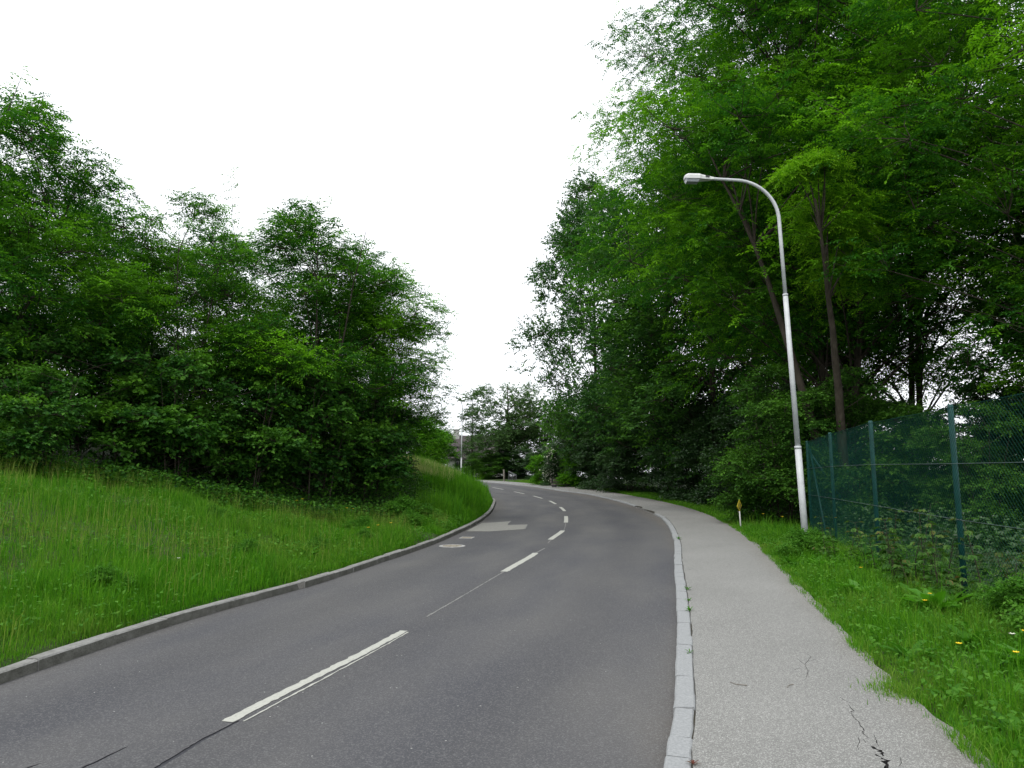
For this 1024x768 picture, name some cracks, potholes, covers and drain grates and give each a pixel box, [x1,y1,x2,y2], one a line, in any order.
crack [840,697,902,768]
